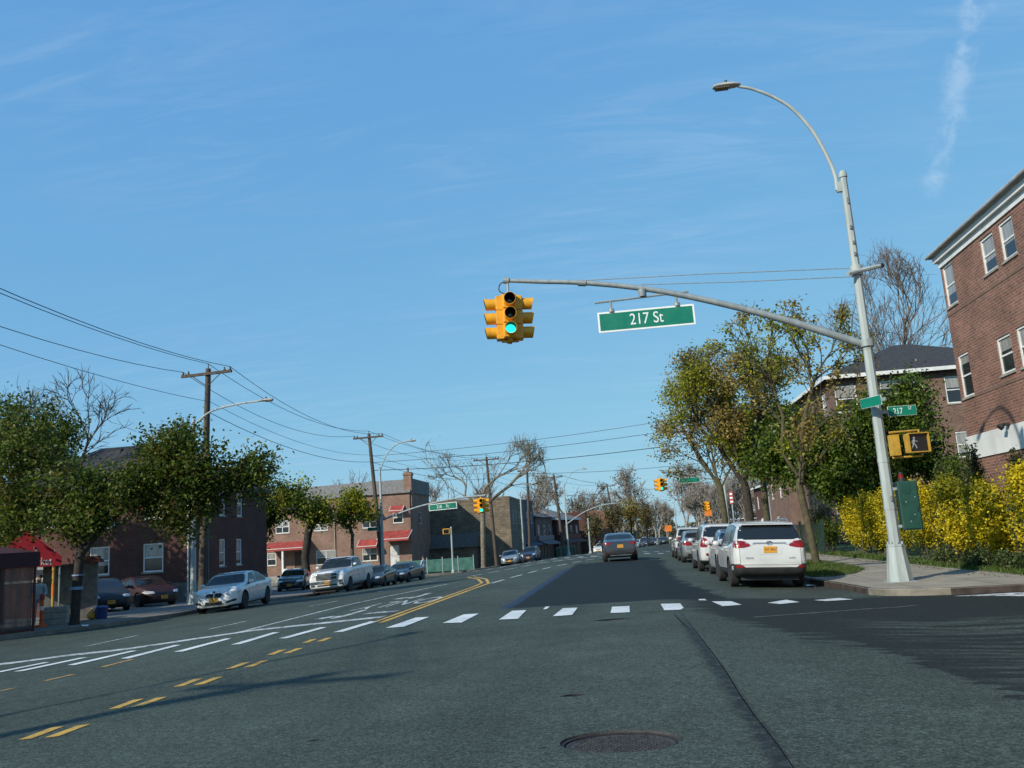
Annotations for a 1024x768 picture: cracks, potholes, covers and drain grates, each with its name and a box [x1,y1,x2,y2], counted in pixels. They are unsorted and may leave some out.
manhole cover [560,730,682,753]
